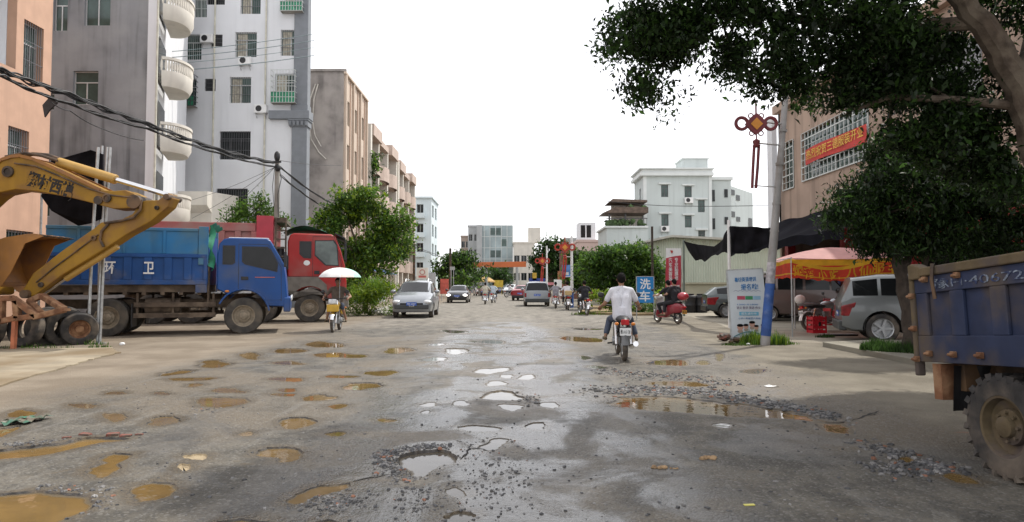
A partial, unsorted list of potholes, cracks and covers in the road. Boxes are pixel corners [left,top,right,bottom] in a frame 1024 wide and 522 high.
pothole [0,490,95,522]
pothole [285,483,351,504]
pothole [254,446,305,462]
pothole [480,390,525,400]
pothole [477,438,510,450]
pothole [0,437,129,459]
pothole [146,416,181,426]
pothole [194,397,251,408]
pothole [444,487,467,497]
pothole [397,449,458,477]
pothole [129,481,179,502]
pothole [277,417,318,429]
